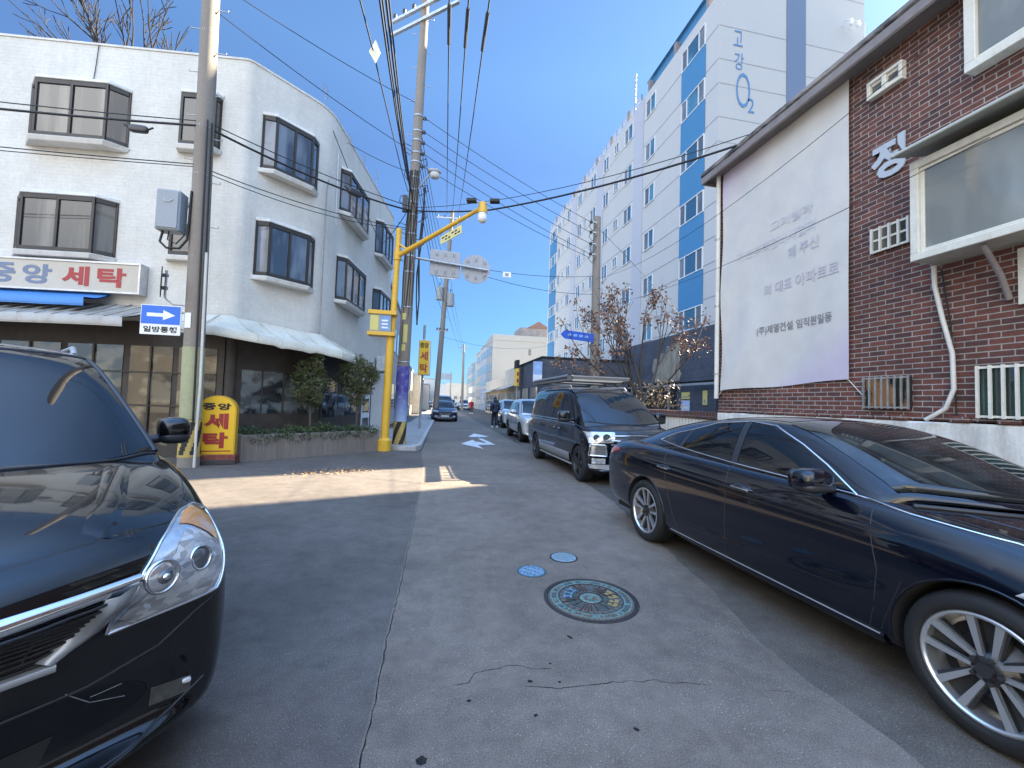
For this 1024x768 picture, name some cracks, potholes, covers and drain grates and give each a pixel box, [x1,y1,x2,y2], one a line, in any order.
manhole cover [550,552,578,563]
crack [359,494,420,768]
manhole cover [517,565,546,578]
crack [457,665,550,685]
crack [526,679,707,689]
manhole cover [544,579,640,624]
